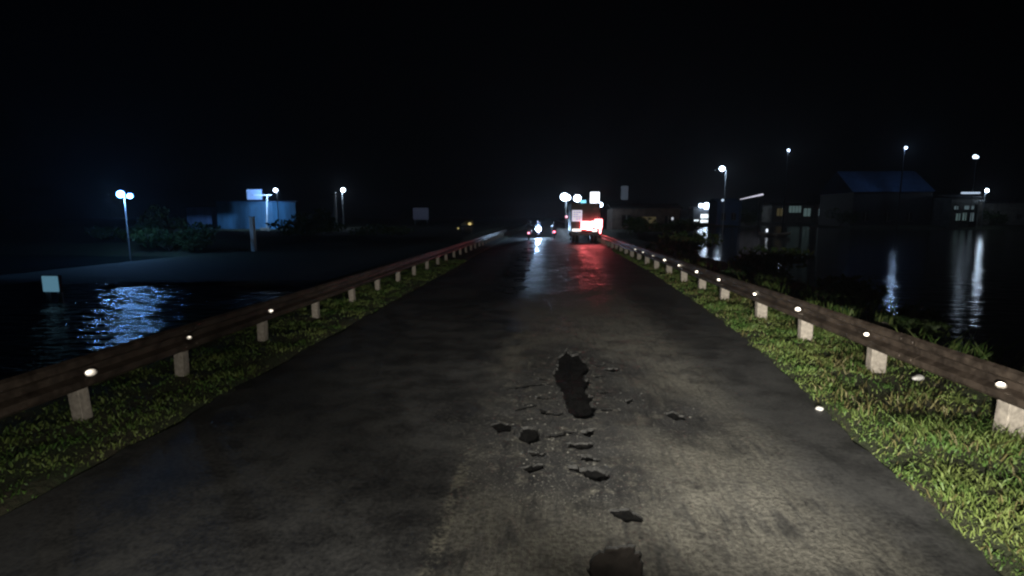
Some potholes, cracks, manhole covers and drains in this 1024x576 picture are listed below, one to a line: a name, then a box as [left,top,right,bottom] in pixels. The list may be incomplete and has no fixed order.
pothole [608,508,644,523]
pothole [520,464,545,474]
pothole [566,465,610,482]
pothole [490,421,512,434]
pothole [552,349,597,419]
pothole [586,544,644,576]
pothole [665,411,686,421]
pothole [518,426,541,445]
pothole [566,442,593,450]
